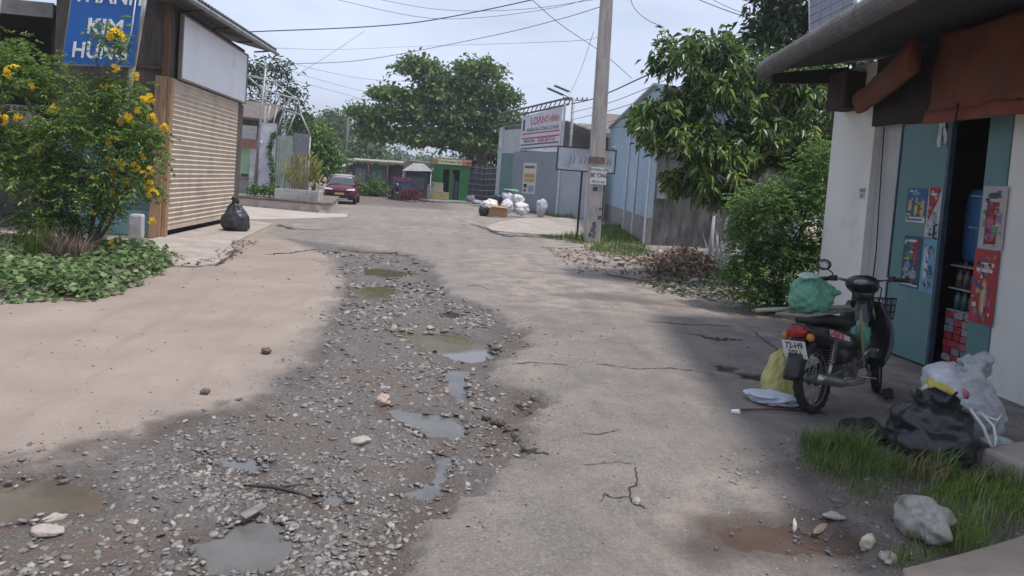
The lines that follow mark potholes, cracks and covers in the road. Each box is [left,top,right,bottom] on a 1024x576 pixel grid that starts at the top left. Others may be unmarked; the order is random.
pothole [374,437,479,511]
pothole [365,402,487,457]
pothole [686,508,886,569]
pothole [0,462,135,539]
pothole [496,382,563,427]
pothole [294,484,373,517]
crack [199,246,238,267]
pothole [147,503,332,576]
pothole [342,285,407,302]
pothole [354,267,426,278]
crack [607,364,711,374]
pothole [373,326,509,366]
